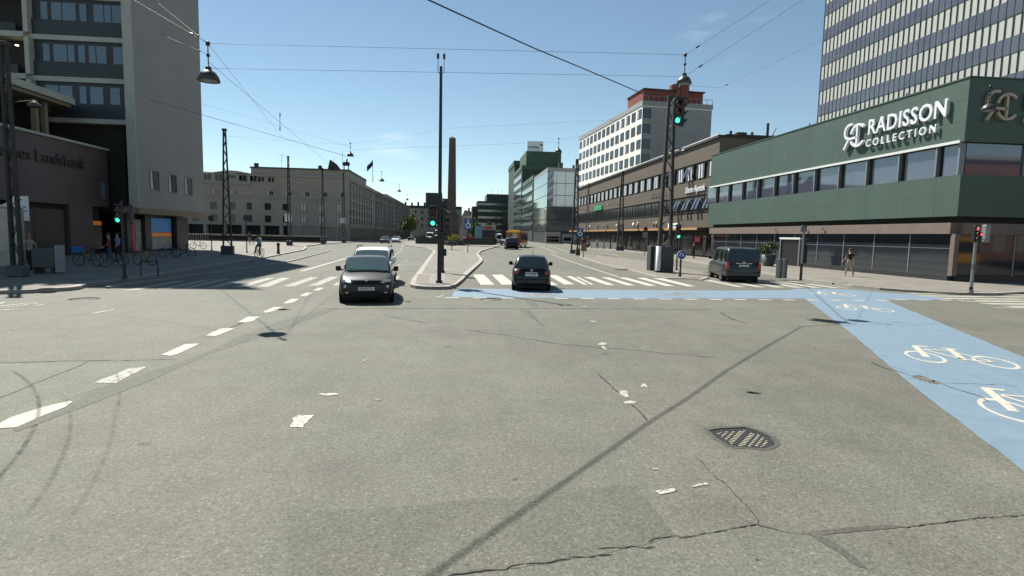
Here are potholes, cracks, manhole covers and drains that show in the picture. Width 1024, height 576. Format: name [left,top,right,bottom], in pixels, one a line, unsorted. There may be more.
crack [388,311,720,358]
crack [446,457,1024,576]
pothole [912,375,942,385]
crack [872,362,1015,402]
